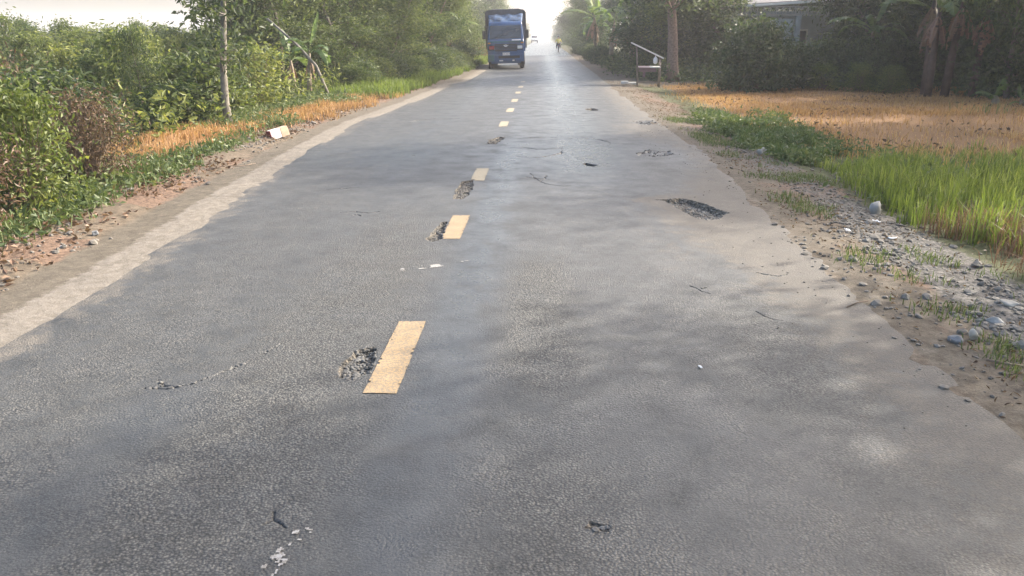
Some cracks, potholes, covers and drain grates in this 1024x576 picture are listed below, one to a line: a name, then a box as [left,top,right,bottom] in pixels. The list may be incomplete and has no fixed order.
pothole [636,149,675,157]
pothole [654,198,729,220]
crack [264,511,287,529]
pothole [335,346,378,380]
pothole [425,221,448,242]
pothole [585,520,613,533]
crack [142,342,283,390]
pothole [452,180,474,199]
crack [517,137,611,186]
